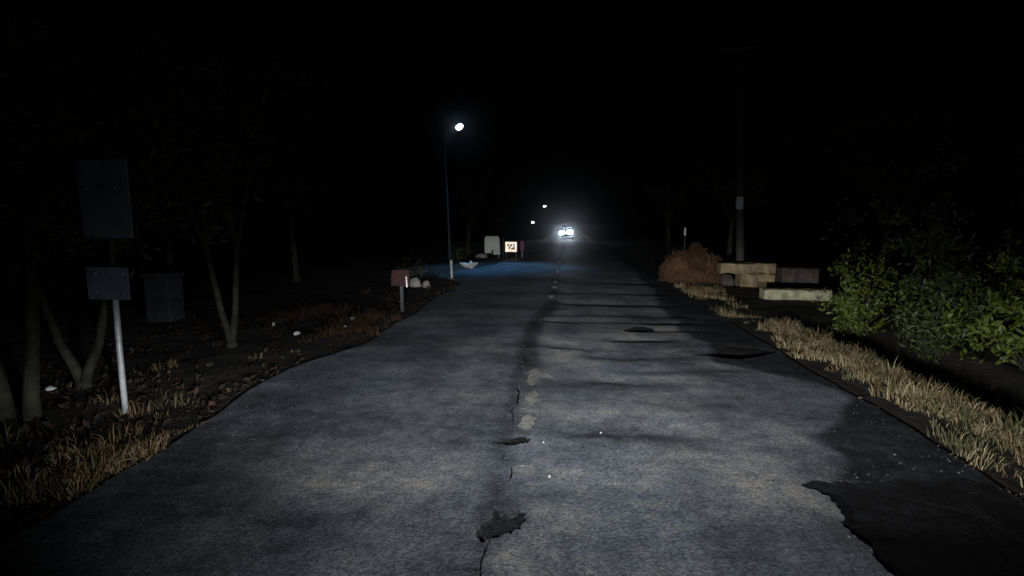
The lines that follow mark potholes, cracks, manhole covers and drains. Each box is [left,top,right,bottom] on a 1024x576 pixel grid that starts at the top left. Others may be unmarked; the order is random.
pothole [474,507,527,543]
pothole [694,345,776,359]
pothole [494,437,532,446]
crack [480,345,527,576]
